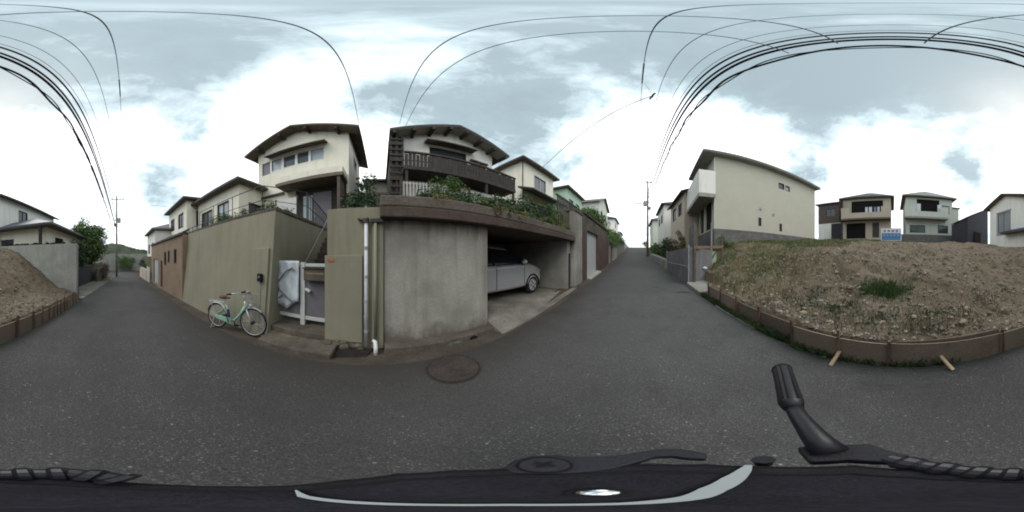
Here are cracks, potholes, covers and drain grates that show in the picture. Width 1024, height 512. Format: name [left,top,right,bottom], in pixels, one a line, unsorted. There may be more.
manhole cover [425,355,481,384]
